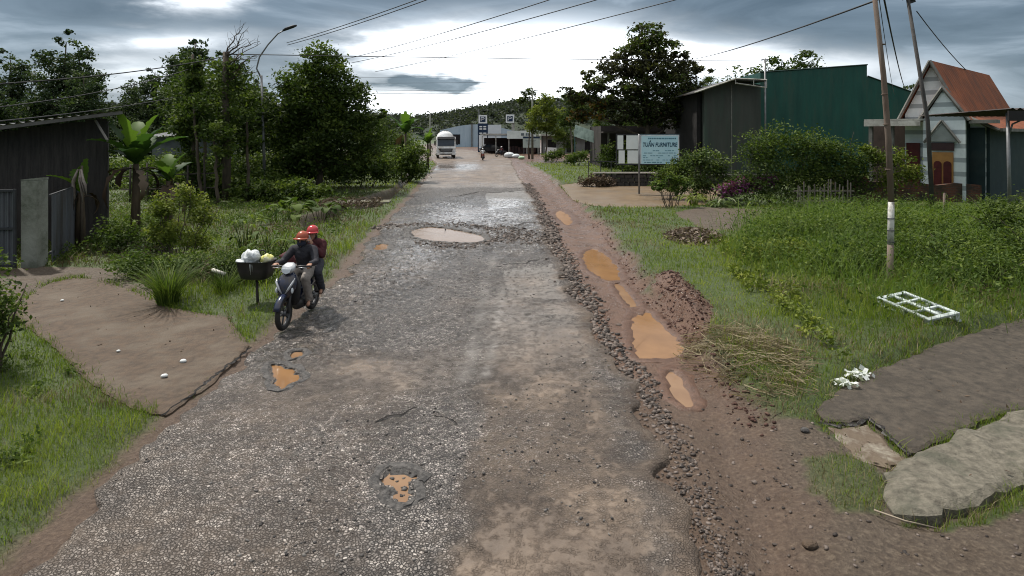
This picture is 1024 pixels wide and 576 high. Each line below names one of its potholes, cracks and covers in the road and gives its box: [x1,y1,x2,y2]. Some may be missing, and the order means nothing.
pothole [260,360,311,393]
pothole [607,280,649,316]
pothole [404,225,491,244]
pothole [575,248,630,284]
pothole [281,348,312,361]
pothole [368,462,434,510]
crack [375,407,458,425]
pothole [619,306,696,363]
pothole [651,365,707,412]
